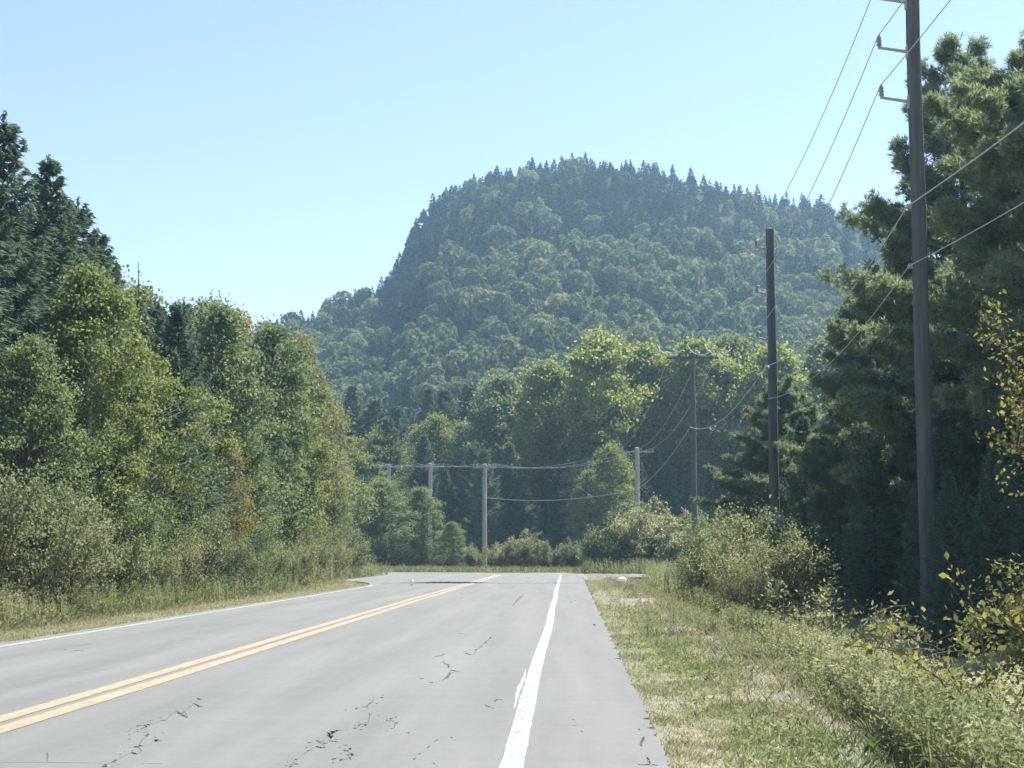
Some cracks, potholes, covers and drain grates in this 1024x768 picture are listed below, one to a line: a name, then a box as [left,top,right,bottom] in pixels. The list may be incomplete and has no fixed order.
crack [418,633,491,683]
crack [285,697,452,768]
crack [1,698,204,768]
